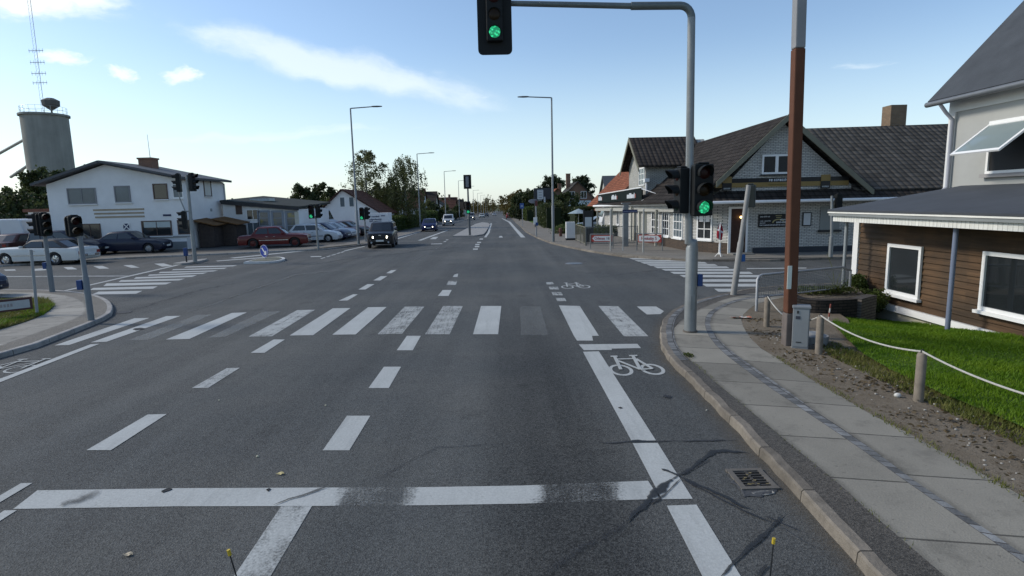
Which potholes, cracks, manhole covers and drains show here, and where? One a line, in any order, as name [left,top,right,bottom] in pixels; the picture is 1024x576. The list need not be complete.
drain grate [725,468,780,490]
